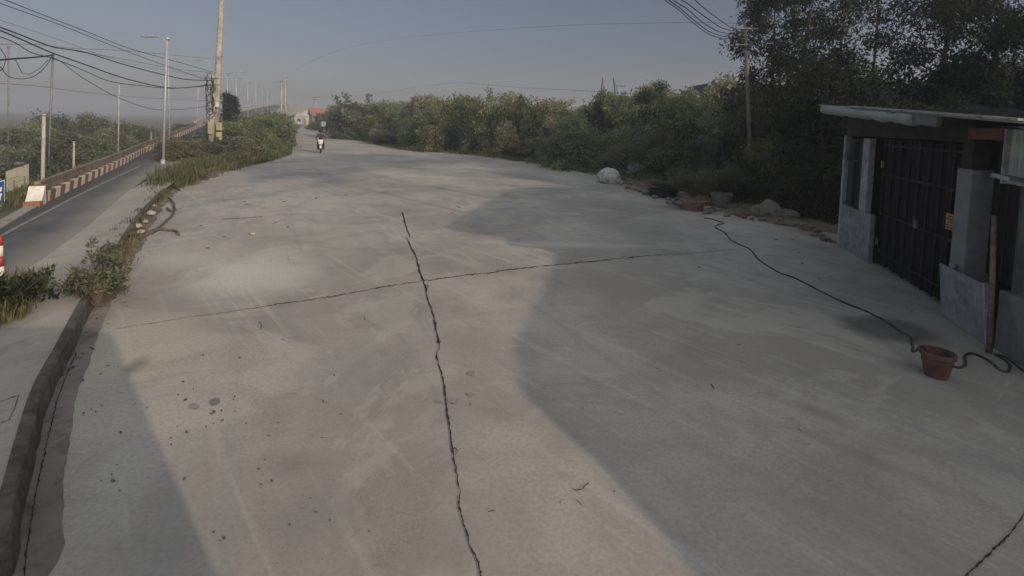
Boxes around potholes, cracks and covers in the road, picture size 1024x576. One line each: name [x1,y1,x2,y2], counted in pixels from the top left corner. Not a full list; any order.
crack [117,213,735,576]
crack [965,514,1024,576]
